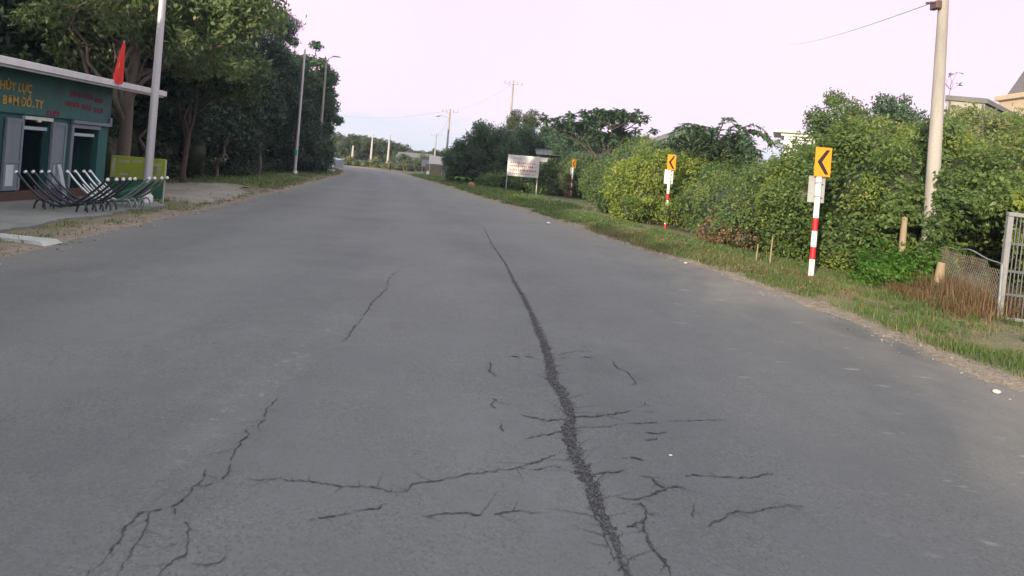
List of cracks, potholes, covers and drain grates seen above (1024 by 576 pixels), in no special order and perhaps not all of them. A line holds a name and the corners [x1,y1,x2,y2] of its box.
crack [87,396,279,576]
crack [340,271,401,343]
crack [595,457,815,575]
crack [244,450,566,522]
crack [474,351,724,440]
